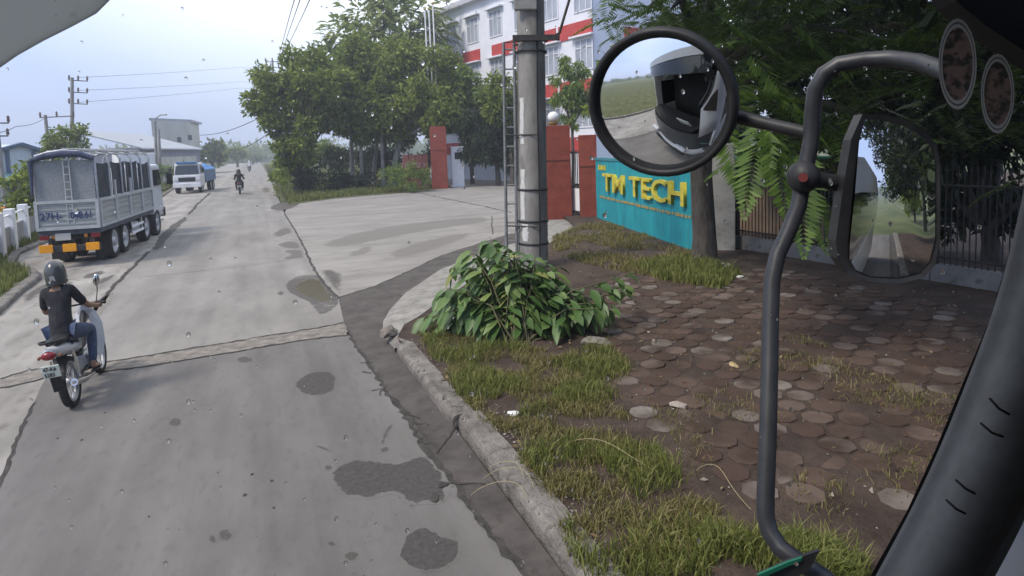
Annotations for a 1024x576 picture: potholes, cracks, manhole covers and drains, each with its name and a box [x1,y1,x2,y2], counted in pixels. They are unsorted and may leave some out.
pothole [295,278,334,302]
